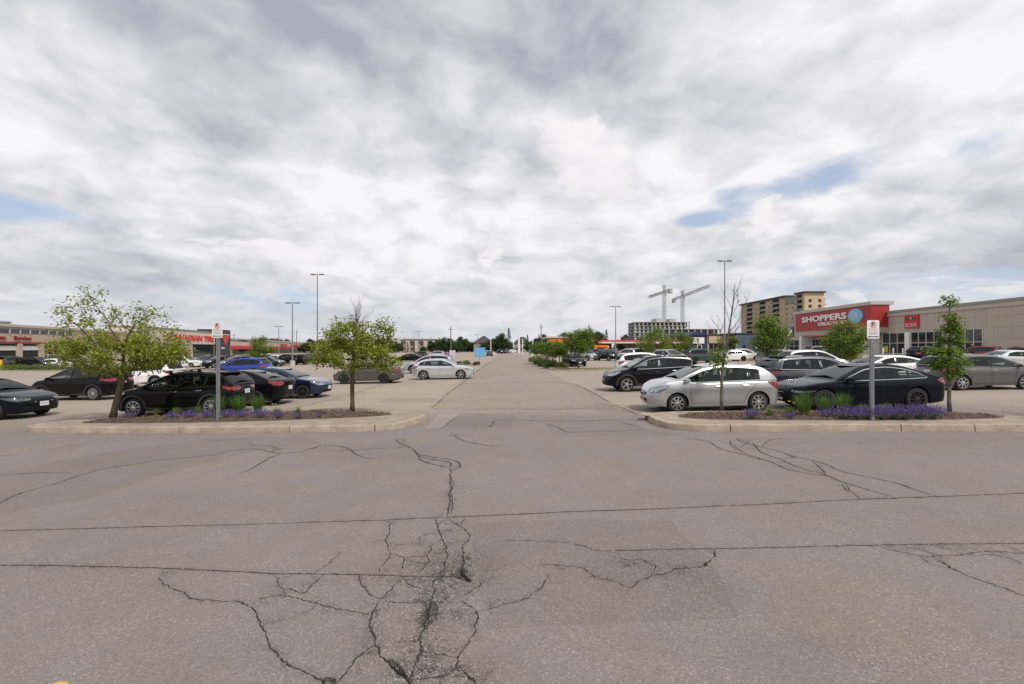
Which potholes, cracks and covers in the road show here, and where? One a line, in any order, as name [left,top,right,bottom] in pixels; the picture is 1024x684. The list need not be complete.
crack [158,440,716,684]
crack [0,455,211,503]
crack [696,439,939,499]
crack [888,545,1024,596]
